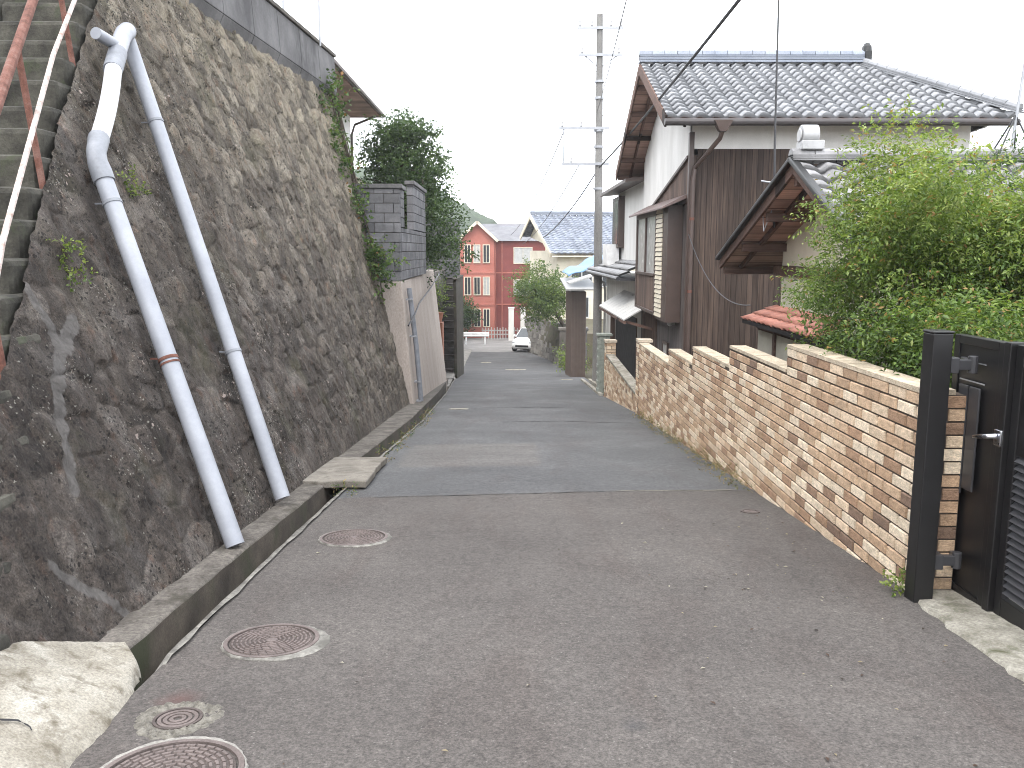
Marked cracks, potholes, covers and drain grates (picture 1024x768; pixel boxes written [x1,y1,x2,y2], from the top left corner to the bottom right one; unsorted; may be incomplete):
manhole cover [220,623,330,661]
manhole cover [133,700,225,740]
manhole cover [100,736,249,768]
manhole cover [318,529,392,548]
